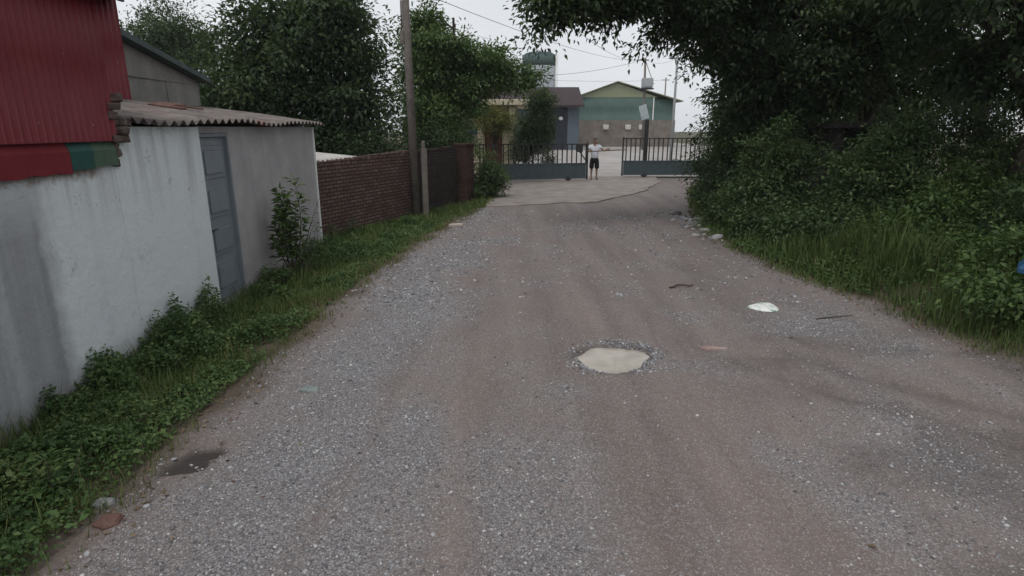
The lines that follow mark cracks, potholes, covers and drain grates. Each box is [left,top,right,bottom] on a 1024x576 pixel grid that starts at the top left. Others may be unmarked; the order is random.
pothole [558,336,668,381]
